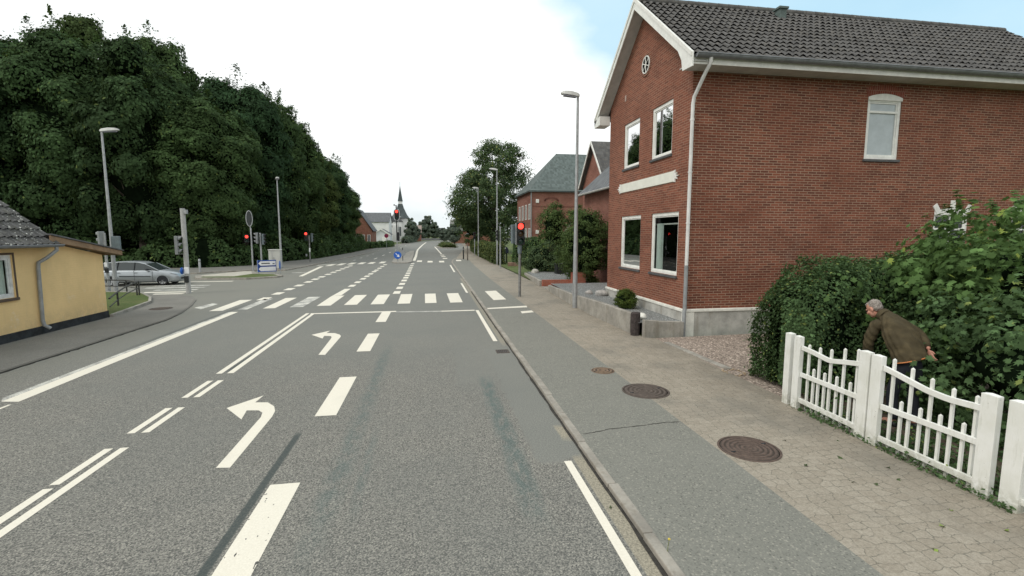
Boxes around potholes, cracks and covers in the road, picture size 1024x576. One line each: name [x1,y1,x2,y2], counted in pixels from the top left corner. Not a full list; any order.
manhole cover [717,436,783,463]
manhole cover [622,384,670,399]
